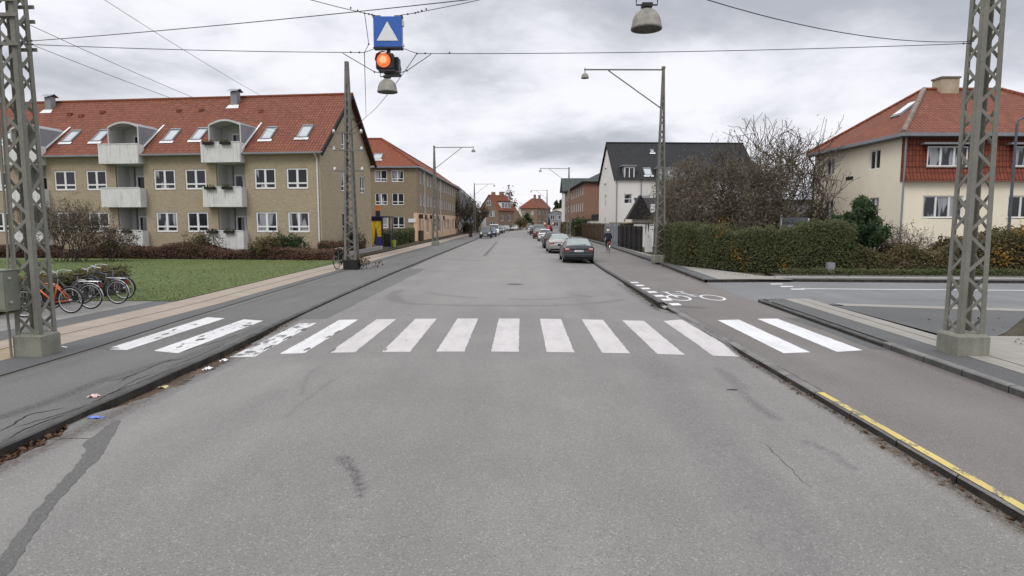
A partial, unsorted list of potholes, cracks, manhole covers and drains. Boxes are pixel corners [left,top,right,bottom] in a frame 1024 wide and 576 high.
crack [2,335,235,441]
